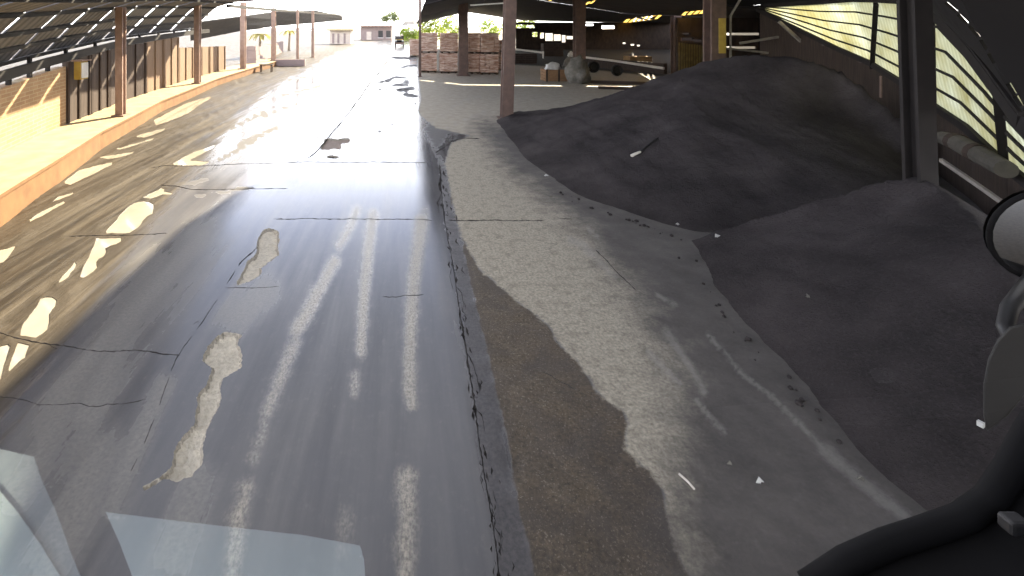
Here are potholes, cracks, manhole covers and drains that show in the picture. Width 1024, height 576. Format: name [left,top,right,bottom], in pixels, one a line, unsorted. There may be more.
crack [0,332,179,356]
pothole [237,228,280,285]
pothole [143,332,242,490]
pothole [320,138,350,150]
crack [145,57,566,576]
crack [3,397,145,407]
